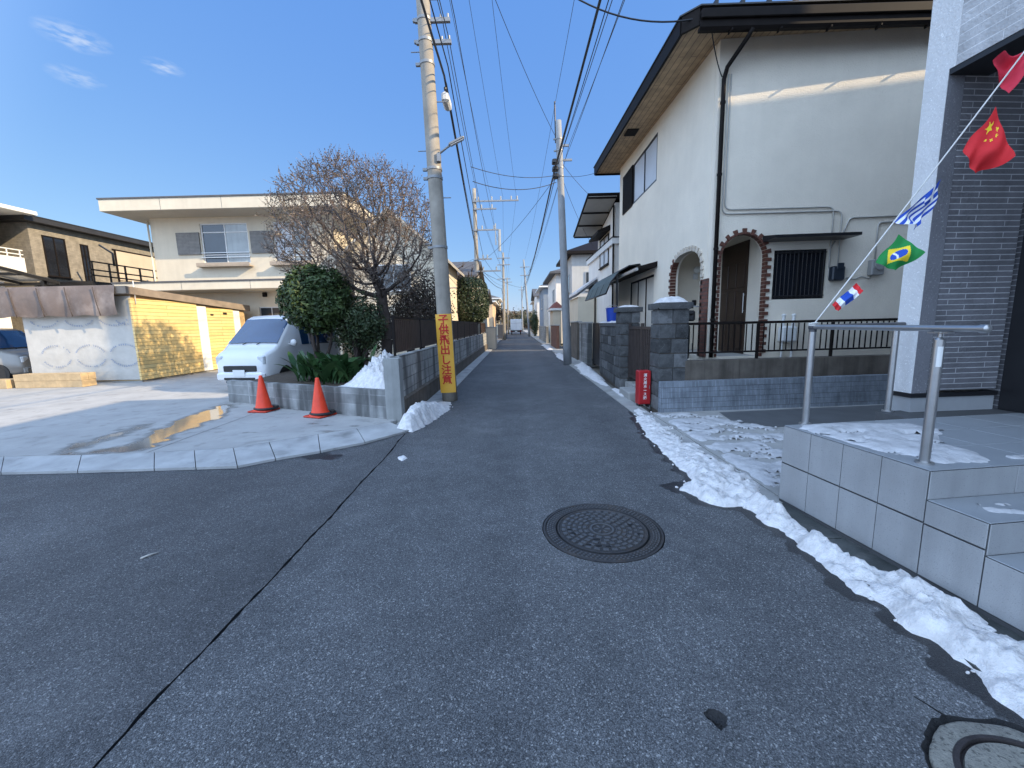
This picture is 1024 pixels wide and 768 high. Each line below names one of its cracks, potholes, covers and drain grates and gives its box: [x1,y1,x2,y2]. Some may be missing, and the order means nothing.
manhole cover [921,714,1024,768]
pothole [704,708,727,731]
manhole cover [542,503,665,563]
